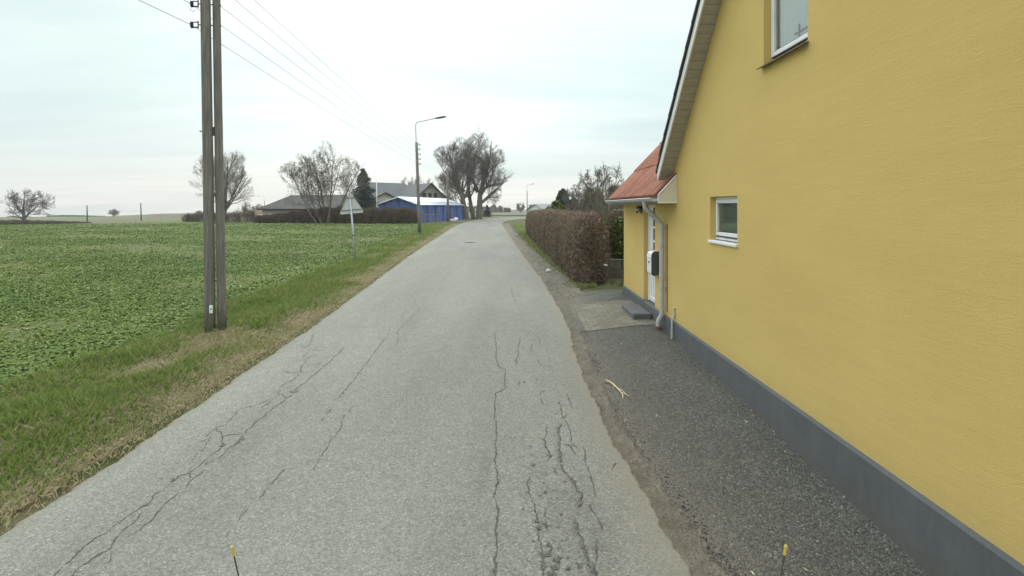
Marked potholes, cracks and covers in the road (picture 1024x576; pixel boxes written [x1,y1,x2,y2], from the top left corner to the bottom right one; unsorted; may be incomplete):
crack [492,331,551,576]
crack [519,379,603,576]
crack [54,305,421,576]
